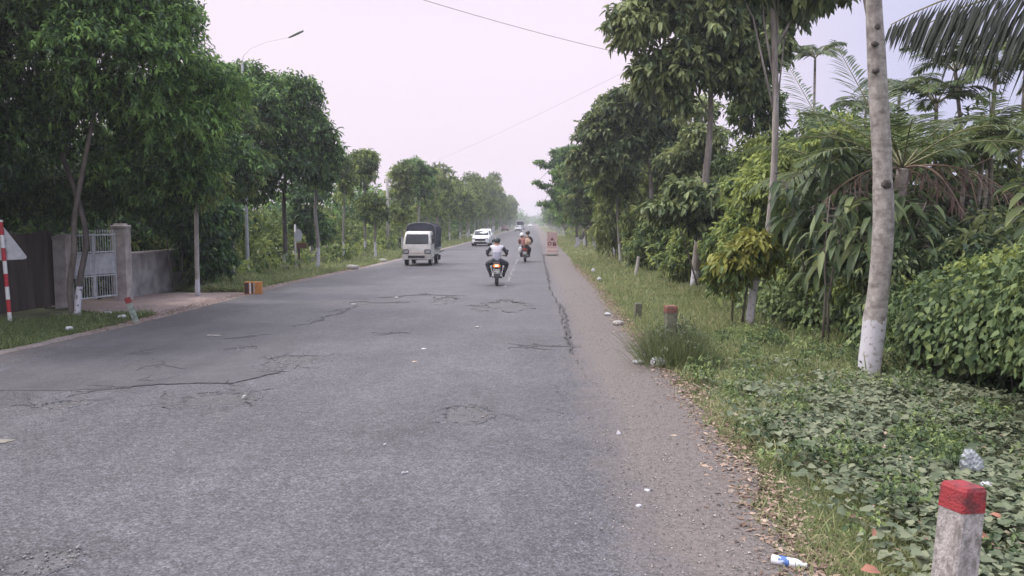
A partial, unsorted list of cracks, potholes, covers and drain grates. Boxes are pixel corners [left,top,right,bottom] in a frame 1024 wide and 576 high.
crack [508,256,580,355]
crack [136,348,186,407]
pothole [467,298,540,313]
crack [290,293,525,327]
